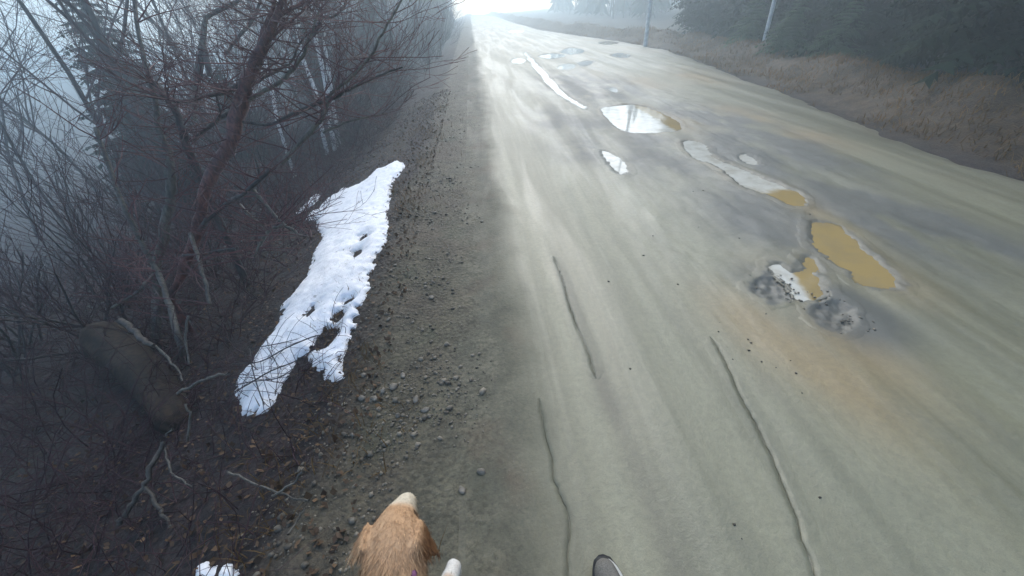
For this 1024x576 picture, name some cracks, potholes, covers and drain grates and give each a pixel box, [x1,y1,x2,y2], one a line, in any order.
crack [547,256,605,379]
pothole [596,103,688,135]
pothole [755,249,843,308]
pothole [573,59,600,67]
pothole [521,52,593,110]
pothole [592,147,638,177]
crack [704,336,836,576]
pothole [557,47,588,55]
pothole [788,290,876,340]
pothole [796,216,921,296]
crack [527,397,589,576]
